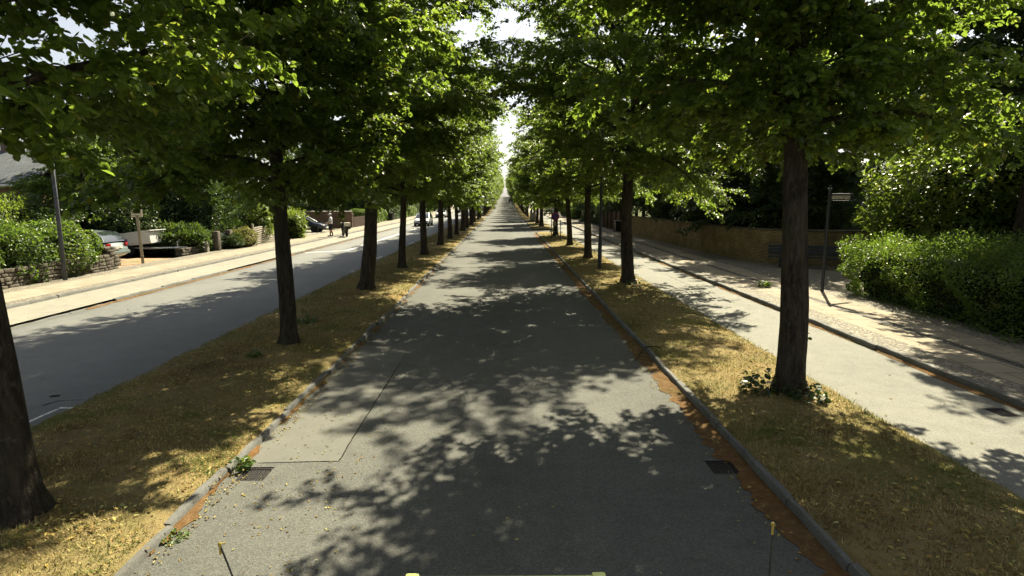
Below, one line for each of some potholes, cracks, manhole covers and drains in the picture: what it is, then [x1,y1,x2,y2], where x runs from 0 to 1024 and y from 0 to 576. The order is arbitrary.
drain grate [236,468,274,481]
drain grate [985,409,1021,417]
drain grate [705,462,738,474]
